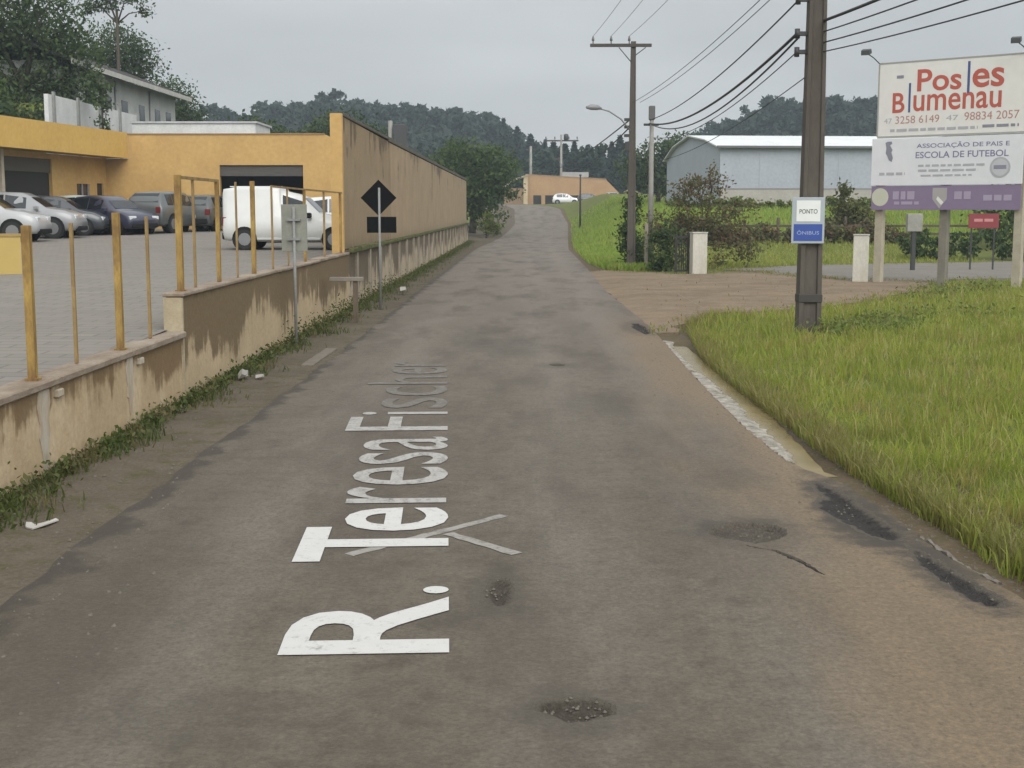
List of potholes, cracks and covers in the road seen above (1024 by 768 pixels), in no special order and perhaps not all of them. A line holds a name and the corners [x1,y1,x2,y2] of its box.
pothole [706,522,788,544]
pothole [529,695,617,723]
pothole [483,576,515,607]
crack [747,545,825,575]
pothole [903,543,1009,608]
pothole [631,323,651,335]
pothole [807,480,907,541]
